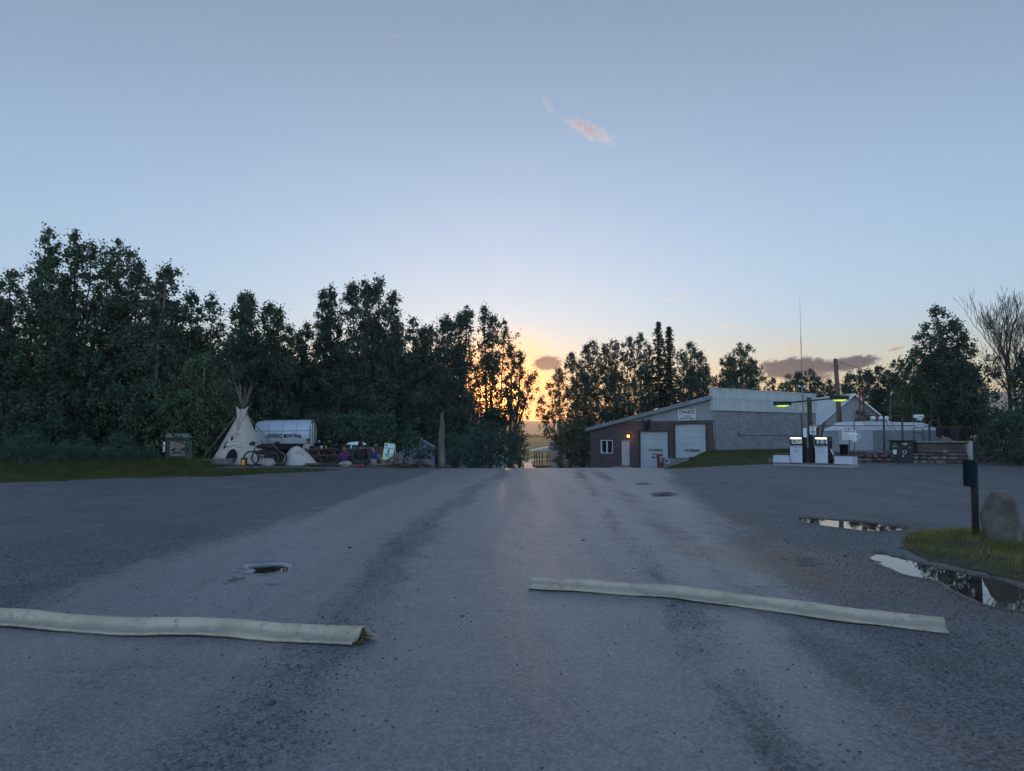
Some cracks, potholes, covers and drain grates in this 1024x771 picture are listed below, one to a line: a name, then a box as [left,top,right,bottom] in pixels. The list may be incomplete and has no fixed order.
pothole [790,516,918,532]
pothole [235,560,301,576]
